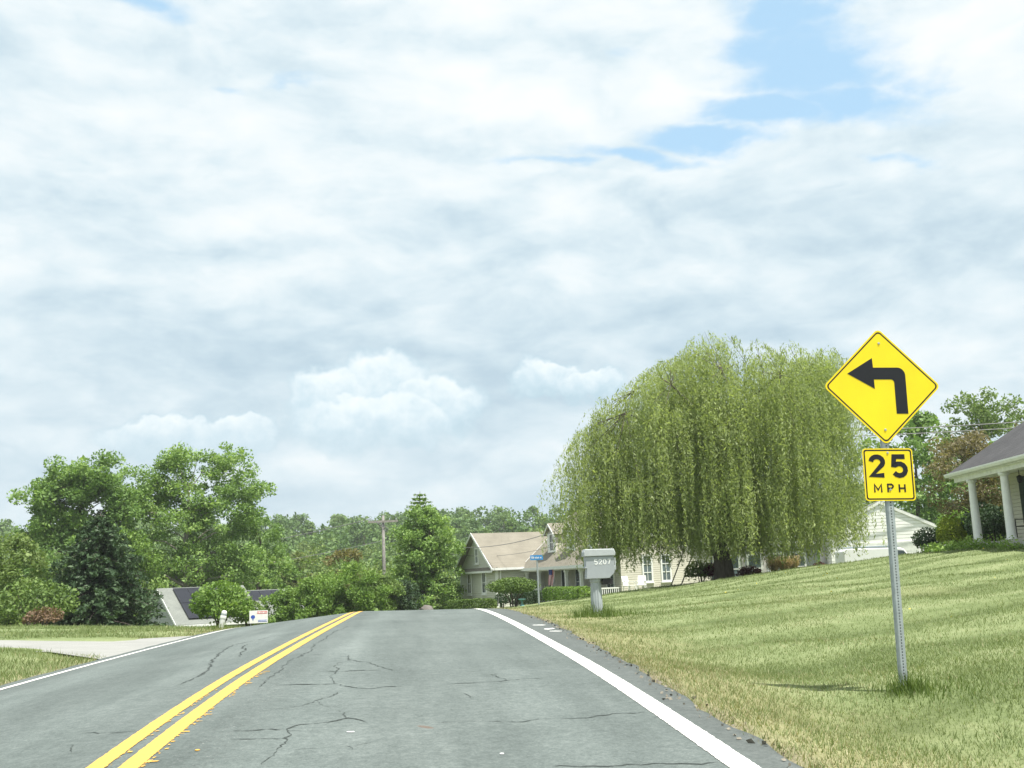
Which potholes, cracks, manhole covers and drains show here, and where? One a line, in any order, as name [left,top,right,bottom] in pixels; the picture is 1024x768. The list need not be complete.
crack [236,654,402,764]
crack [181,637,268,684]
